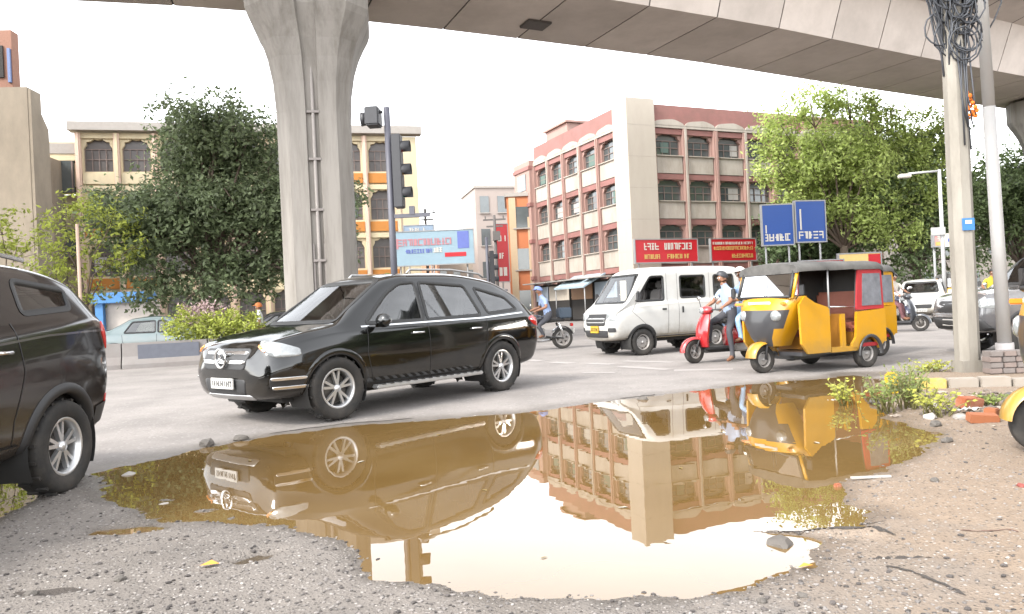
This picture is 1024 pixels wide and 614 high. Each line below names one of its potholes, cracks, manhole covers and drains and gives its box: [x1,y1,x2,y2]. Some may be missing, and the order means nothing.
pothole [89,527,164,535]
crack [872,555,965,595]
